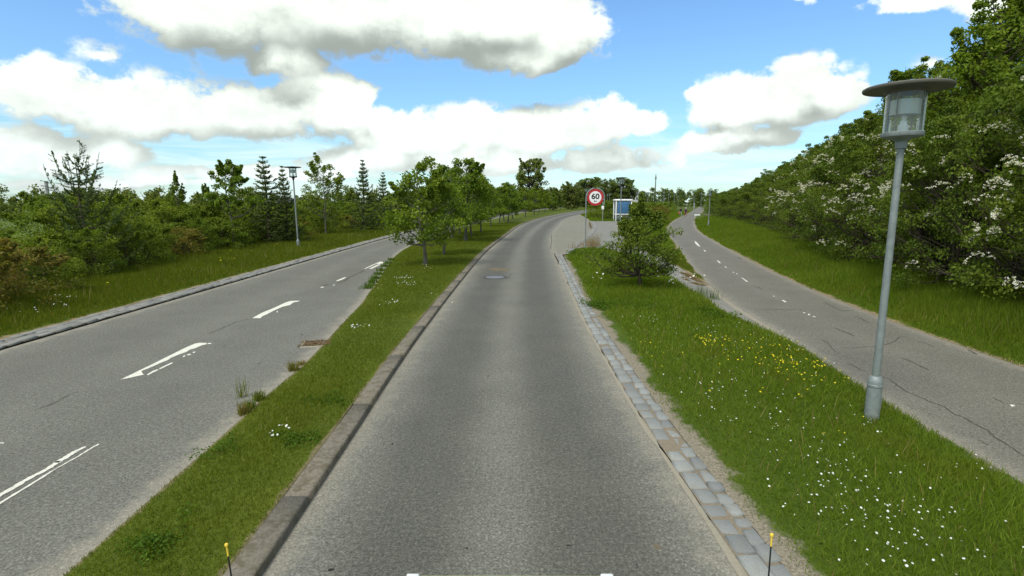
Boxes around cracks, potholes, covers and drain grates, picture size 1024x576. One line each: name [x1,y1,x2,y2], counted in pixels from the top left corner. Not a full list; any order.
drain grate [297,338,331,348]
crack [821,304,940,371]
crack [881,375,1024,456]
